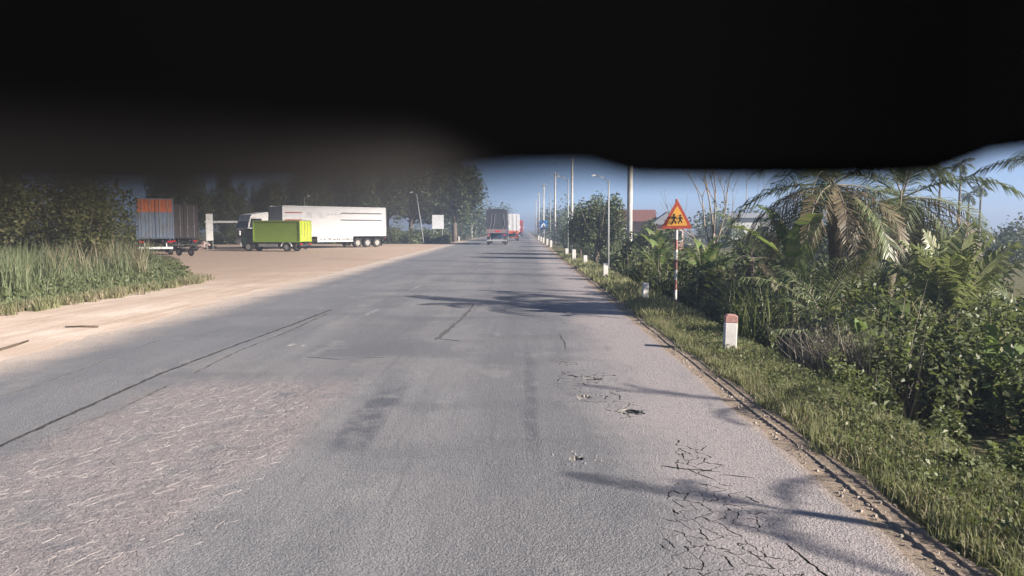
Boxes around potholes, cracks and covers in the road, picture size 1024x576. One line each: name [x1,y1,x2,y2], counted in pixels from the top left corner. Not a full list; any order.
crack [655,440,828,576]
crack [554,360,642,418]
